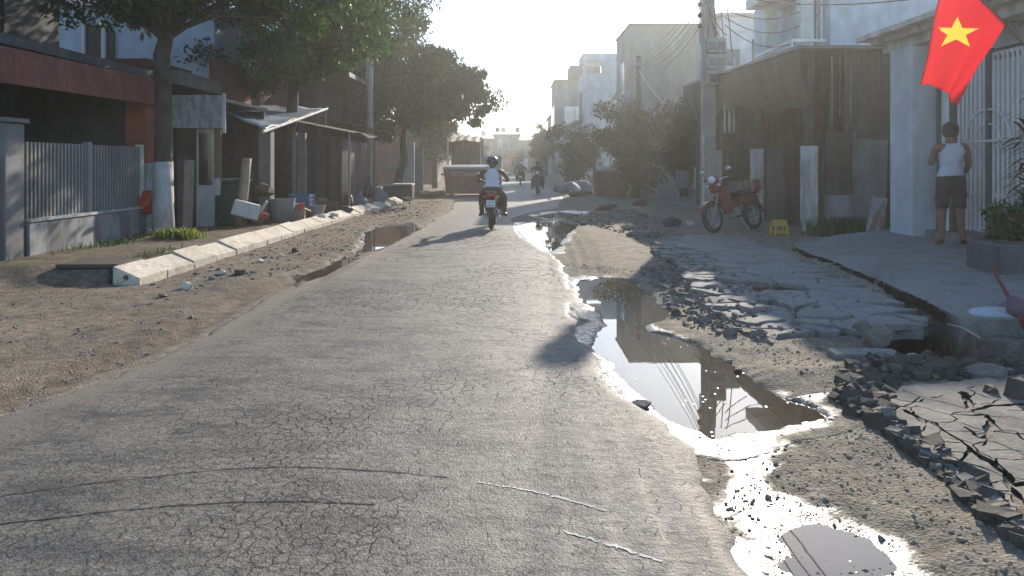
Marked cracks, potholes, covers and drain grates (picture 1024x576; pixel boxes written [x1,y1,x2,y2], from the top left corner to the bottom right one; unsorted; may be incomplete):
crack [34,334,651,434]
pothole [567,274,868,461]
crack [651,248,946,338]
crack [0,431,712,576]
pothole [514,220,589,255]
crack [242,235,568,335]
crack [894,387,1024,511]
